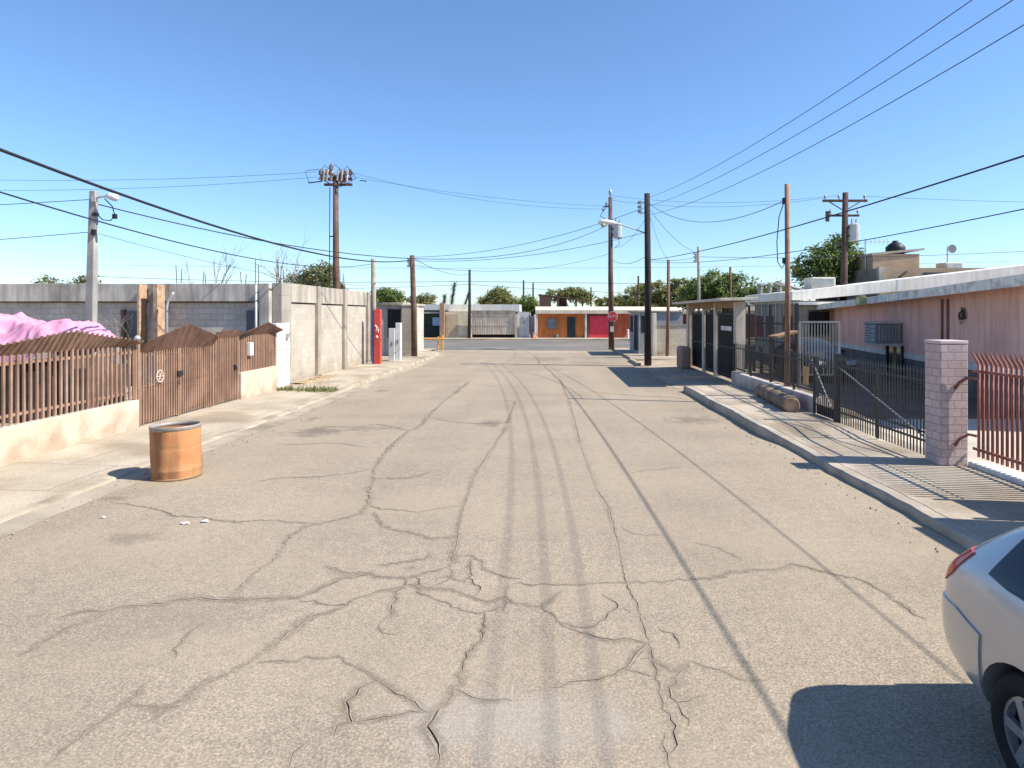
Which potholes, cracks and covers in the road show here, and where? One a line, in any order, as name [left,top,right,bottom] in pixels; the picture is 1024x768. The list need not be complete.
crack [17,381,927,768]
